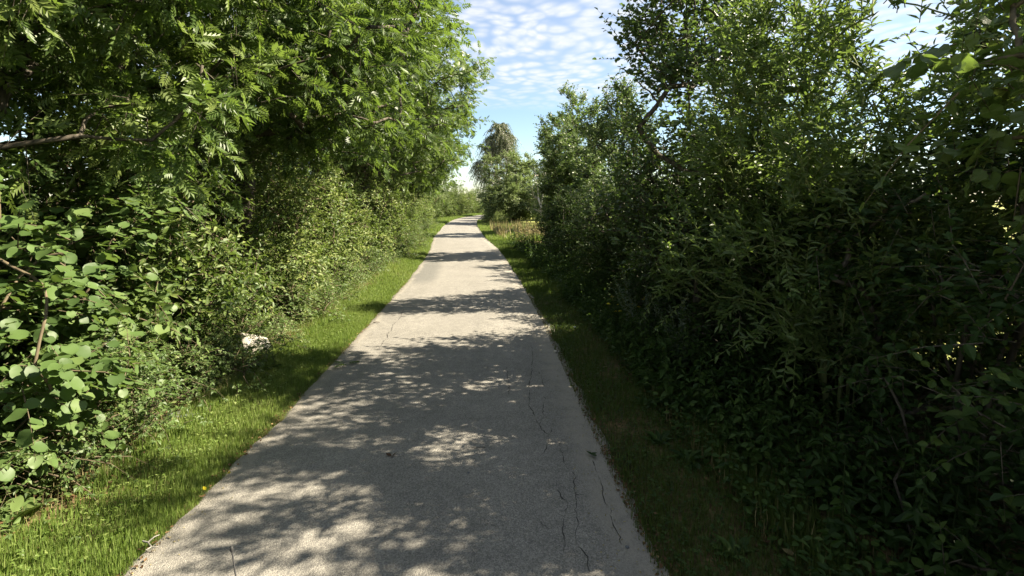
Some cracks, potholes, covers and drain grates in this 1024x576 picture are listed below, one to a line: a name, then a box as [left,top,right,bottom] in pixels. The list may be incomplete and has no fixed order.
crack [528,348,590,572]
